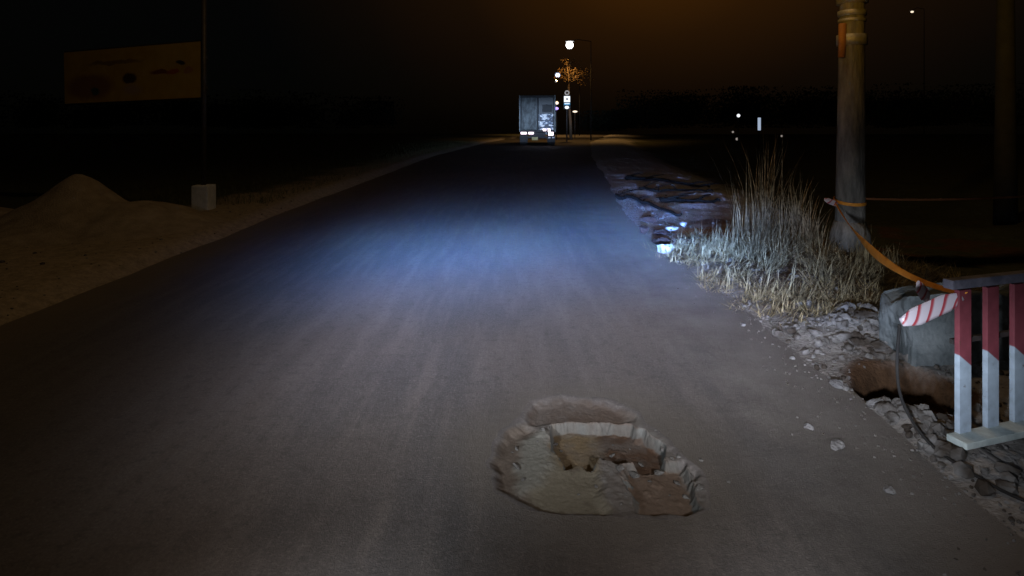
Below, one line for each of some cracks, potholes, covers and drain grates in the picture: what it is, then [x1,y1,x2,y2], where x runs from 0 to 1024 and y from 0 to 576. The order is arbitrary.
pothole [485,393,731,520]
